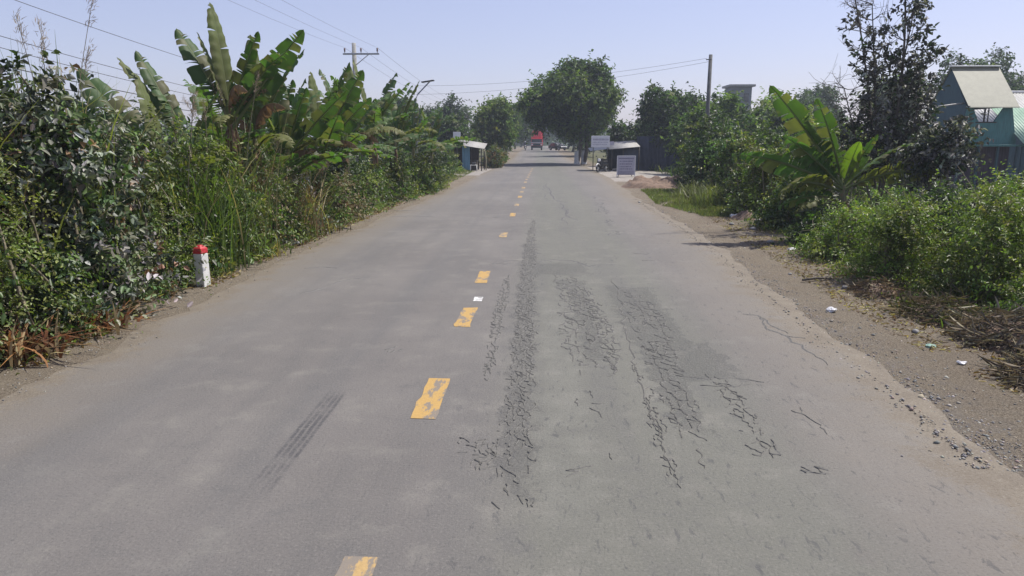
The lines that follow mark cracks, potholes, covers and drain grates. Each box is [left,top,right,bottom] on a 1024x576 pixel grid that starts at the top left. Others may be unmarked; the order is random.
crack [457,216,828,509]
crack [542,184,620,235]
